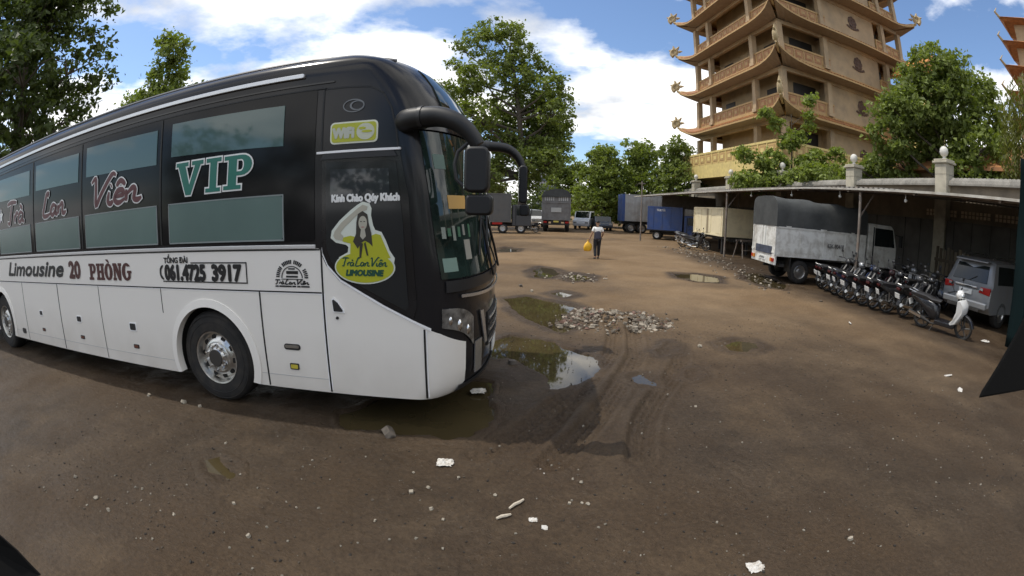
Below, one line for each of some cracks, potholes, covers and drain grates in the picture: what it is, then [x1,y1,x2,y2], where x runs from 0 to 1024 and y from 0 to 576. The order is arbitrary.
pothole [559,272,596,282]
pothole [711,338,769,354]
pothole [547,291,579,299]
pothole [490,333,608,392]
pothole [192,451,251,491]
pothole [526,266,565,278]
pothole [327,376,506,448]
pothole [670,272,722,283]
